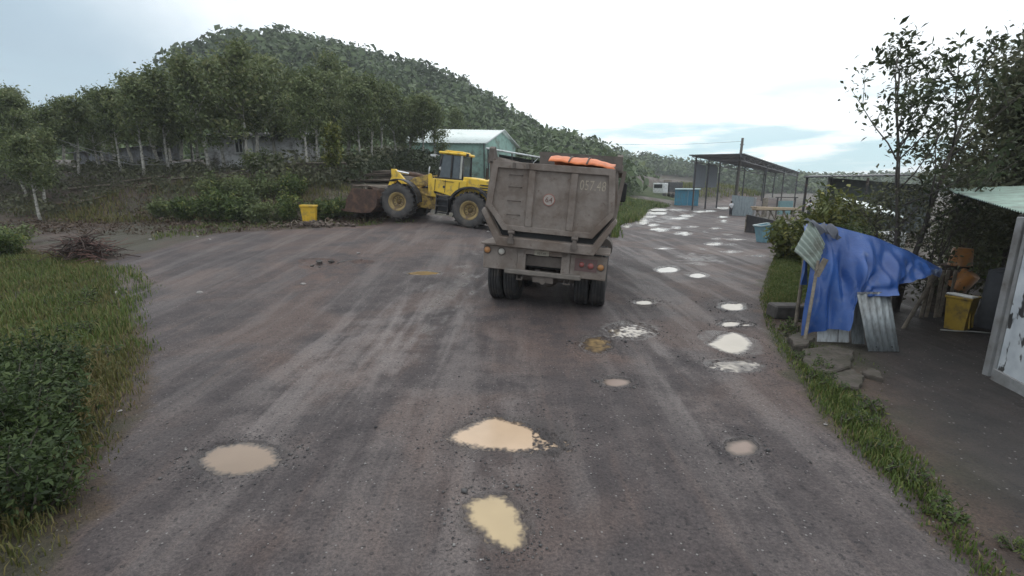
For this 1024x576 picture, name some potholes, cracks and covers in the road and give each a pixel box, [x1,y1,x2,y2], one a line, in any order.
pothole [599,320,660,340]
pothole [722,437,760,456]
pothole [704,358,764,373]
pothole [440,413,575,457]
pothole [460,490,532,553]
pothole [193,439,285,477]
pothole [717,302,746,311]
pothole [578,335,615,354]
pothole [600,376,633,387]
pothole [704,330,755,355]
